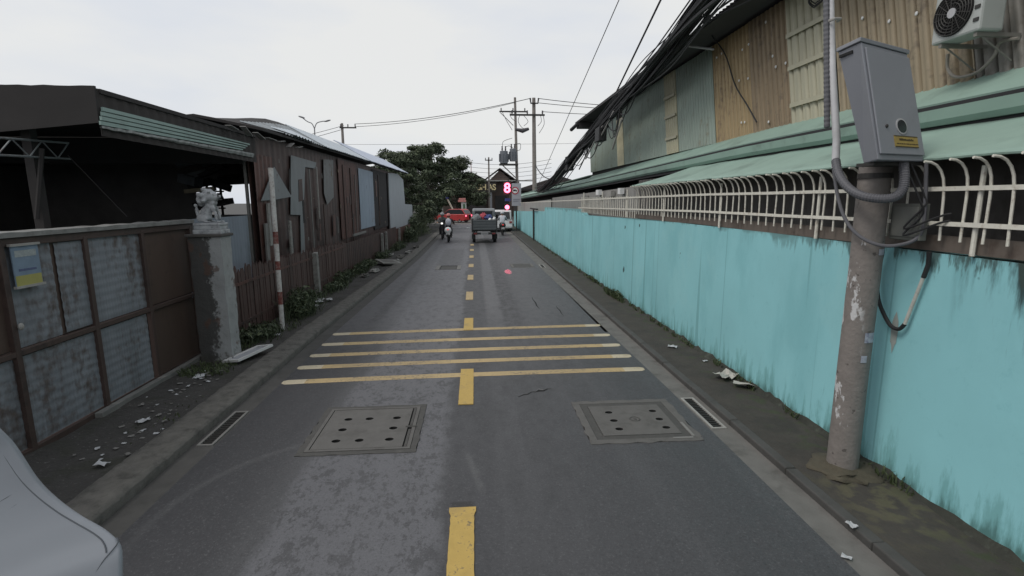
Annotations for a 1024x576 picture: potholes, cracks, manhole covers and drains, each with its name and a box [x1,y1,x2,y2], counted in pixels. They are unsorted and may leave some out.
manhole cover [294,404,427,457]
drain grate [196,411,249,447]
drain grate [680,397,727,429]
manhole cover [571,399,704,445]
